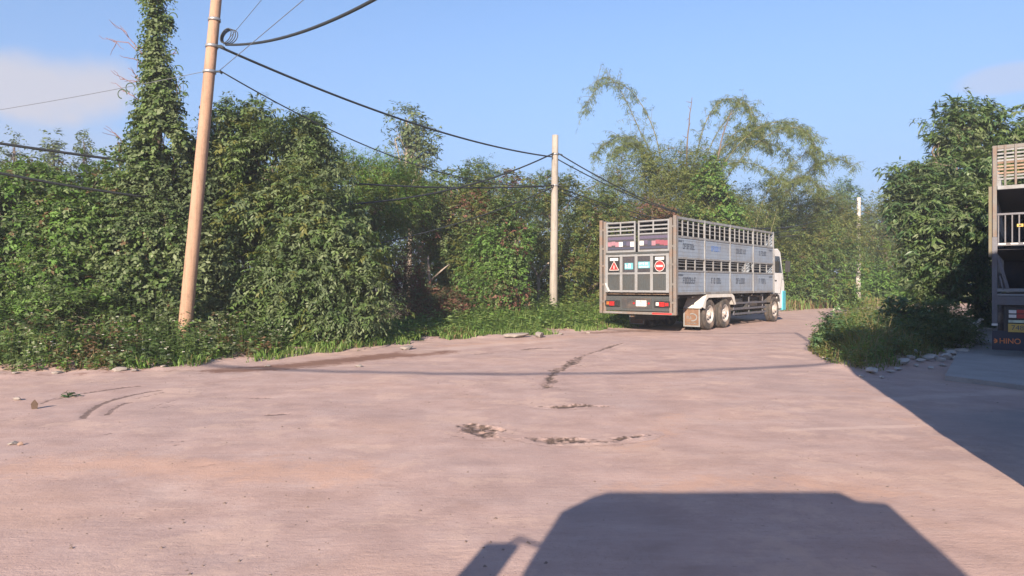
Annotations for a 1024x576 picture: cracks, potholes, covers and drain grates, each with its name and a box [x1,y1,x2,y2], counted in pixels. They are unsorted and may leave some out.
pothole [446,422,517,441]
crack [530,342,632,410]
